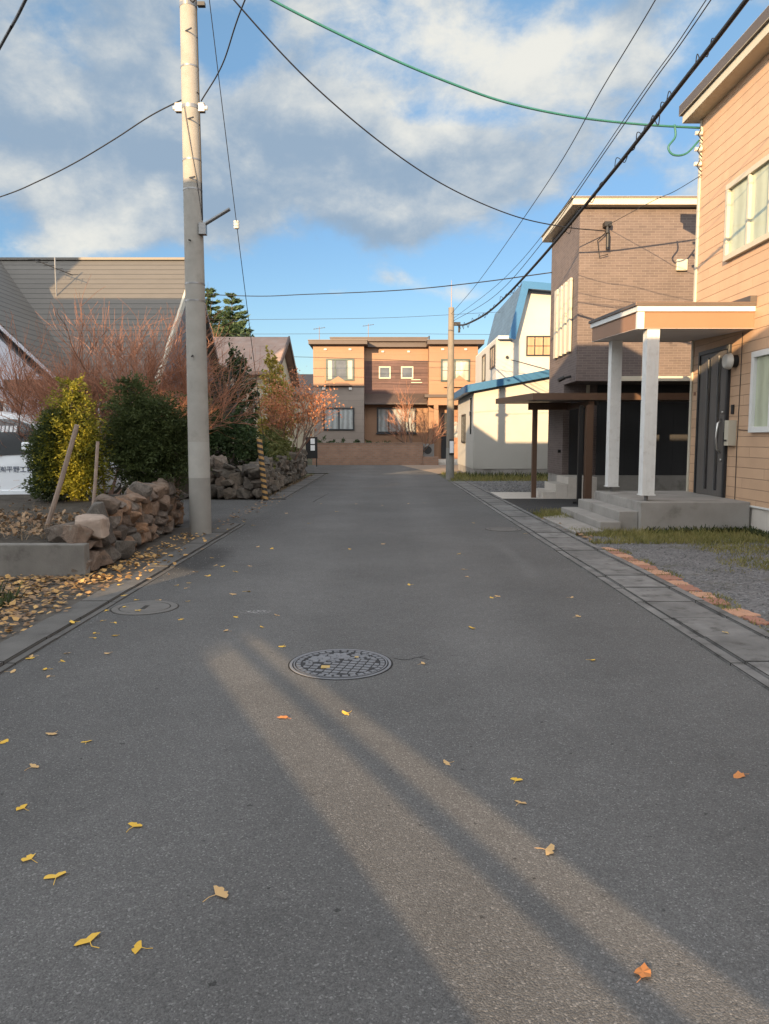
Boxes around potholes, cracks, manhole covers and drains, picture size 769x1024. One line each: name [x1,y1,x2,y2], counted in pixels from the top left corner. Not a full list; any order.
manhole cover [288,649,393,680]
manhole cover [110,600,179,615]
